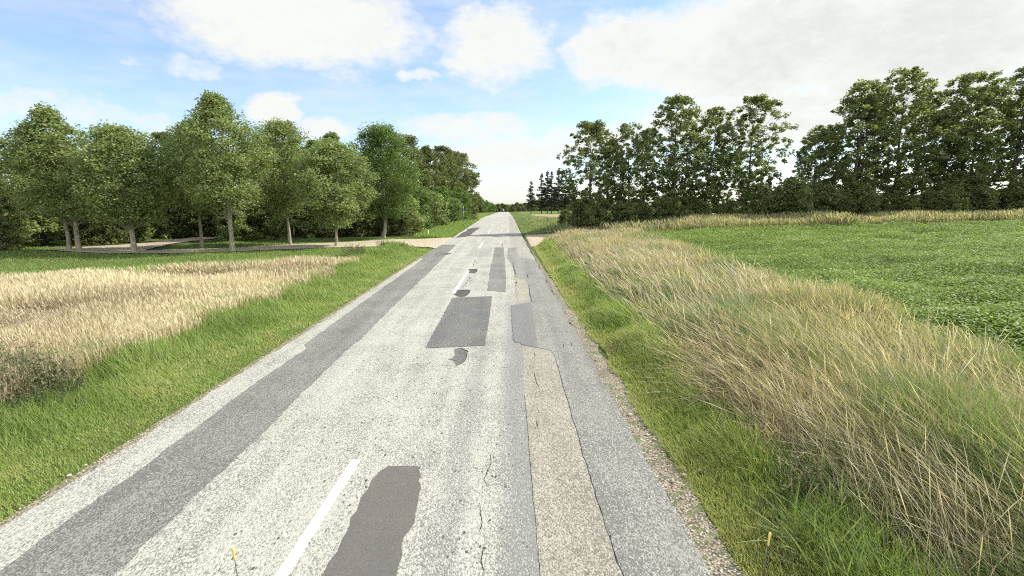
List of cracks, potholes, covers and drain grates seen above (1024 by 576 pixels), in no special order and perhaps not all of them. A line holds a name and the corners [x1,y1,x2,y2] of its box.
crack [475,455,491,573]
